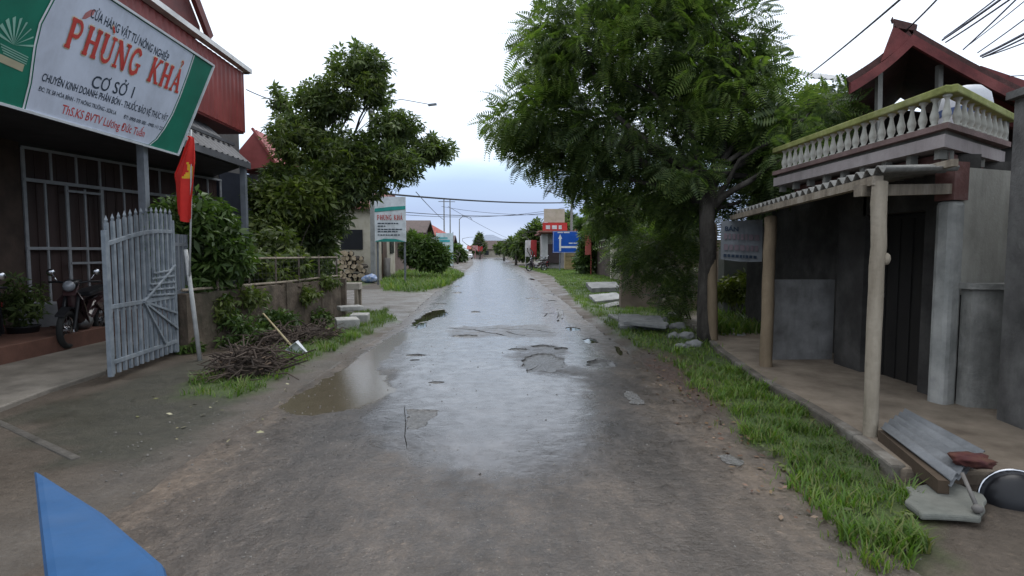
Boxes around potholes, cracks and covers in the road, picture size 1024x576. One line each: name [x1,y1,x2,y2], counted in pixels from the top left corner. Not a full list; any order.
pothole [521,353,565,373]
pothole [412,309,448,326]
crack [451,313,551,336]
